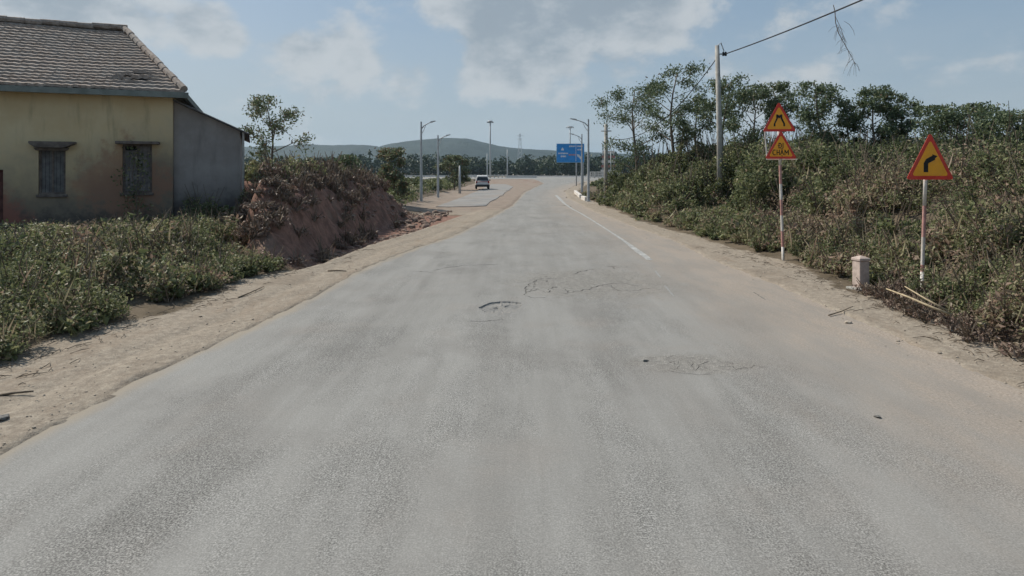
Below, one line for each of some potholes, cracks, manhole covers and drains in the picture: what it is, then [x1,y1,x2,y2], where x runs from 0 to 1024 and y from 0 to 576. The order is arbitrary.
pothole [479,301,522,315]
crack [524,266,647,298]
